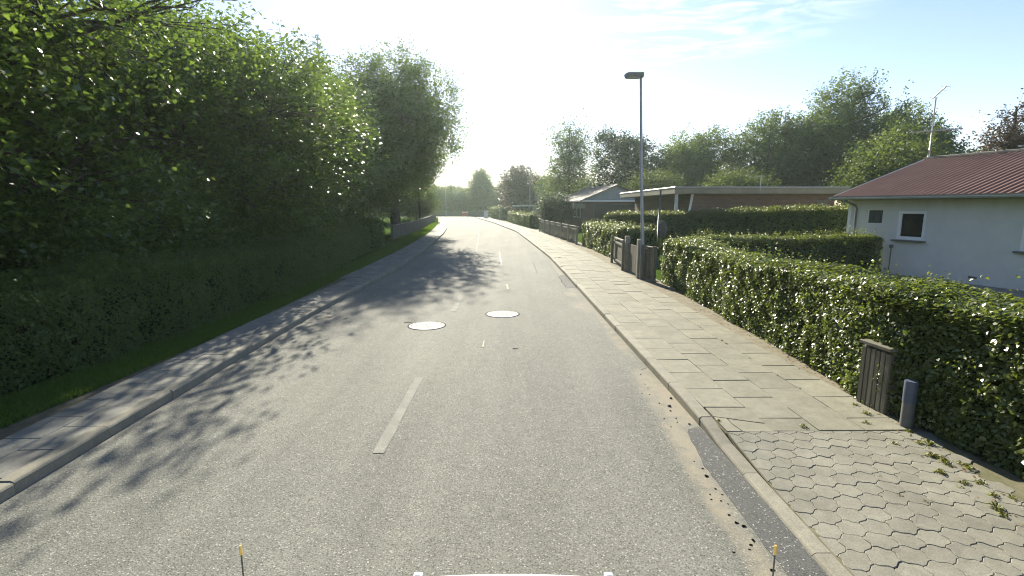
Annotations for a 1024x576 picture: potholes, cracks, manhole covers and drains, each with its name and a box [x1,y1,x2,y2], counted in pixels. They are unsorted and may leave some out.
manhole cover [407,321,446,330]
manhole cover [485,310,520,318]
